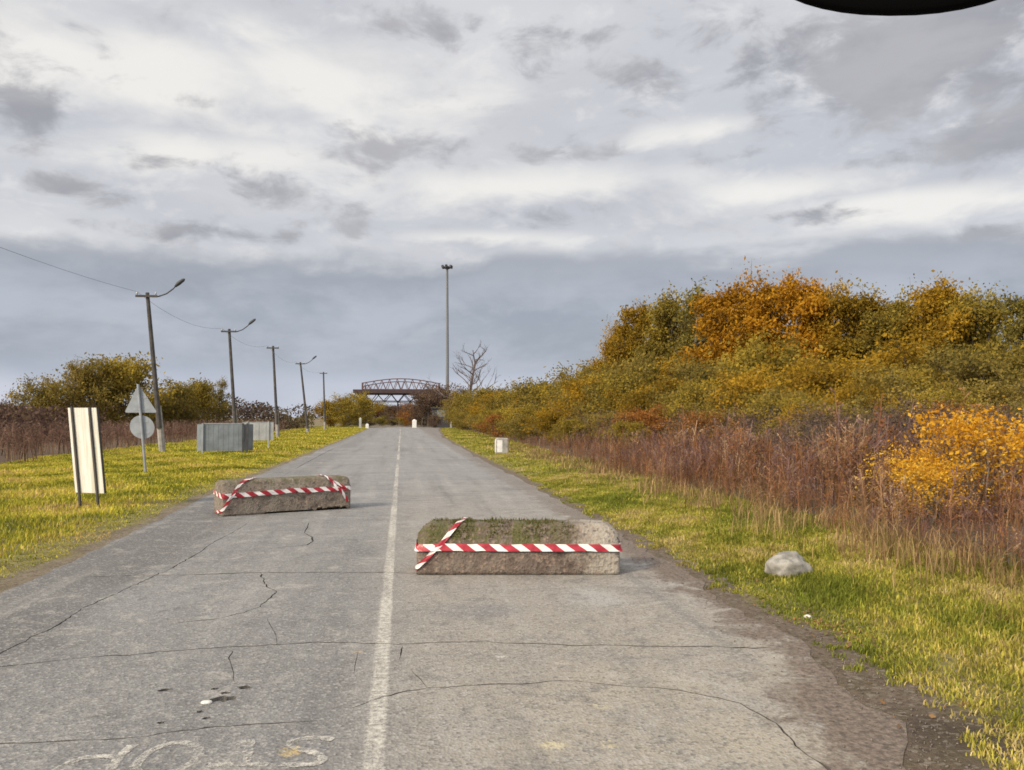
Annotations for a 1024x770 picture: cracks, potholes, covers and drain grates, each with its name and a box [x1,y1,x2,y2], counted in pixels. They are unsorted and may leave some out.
crack [0,619,774,680]
crack [356,671,831,770]
crack [0,524,416,654]
